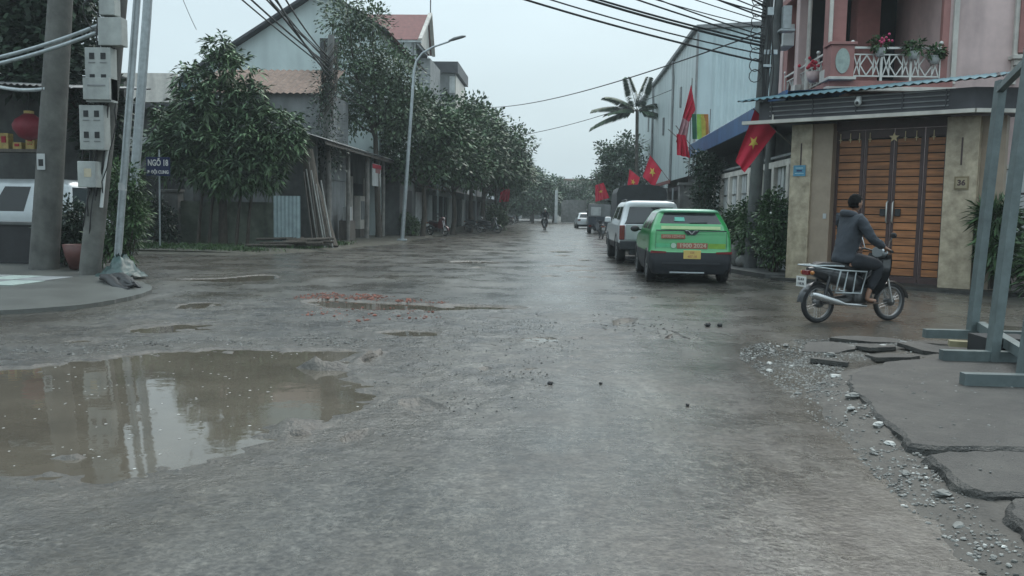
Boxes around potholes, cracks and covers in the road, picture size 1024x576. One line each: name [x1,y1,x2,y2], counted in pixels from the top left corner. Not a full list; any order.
pothole [178,274,281,282]
pothole [300,298,530,311]
pothole [123,322,215,334]
pothole [0,347,390,489]
pothole [612,317,638,326]
